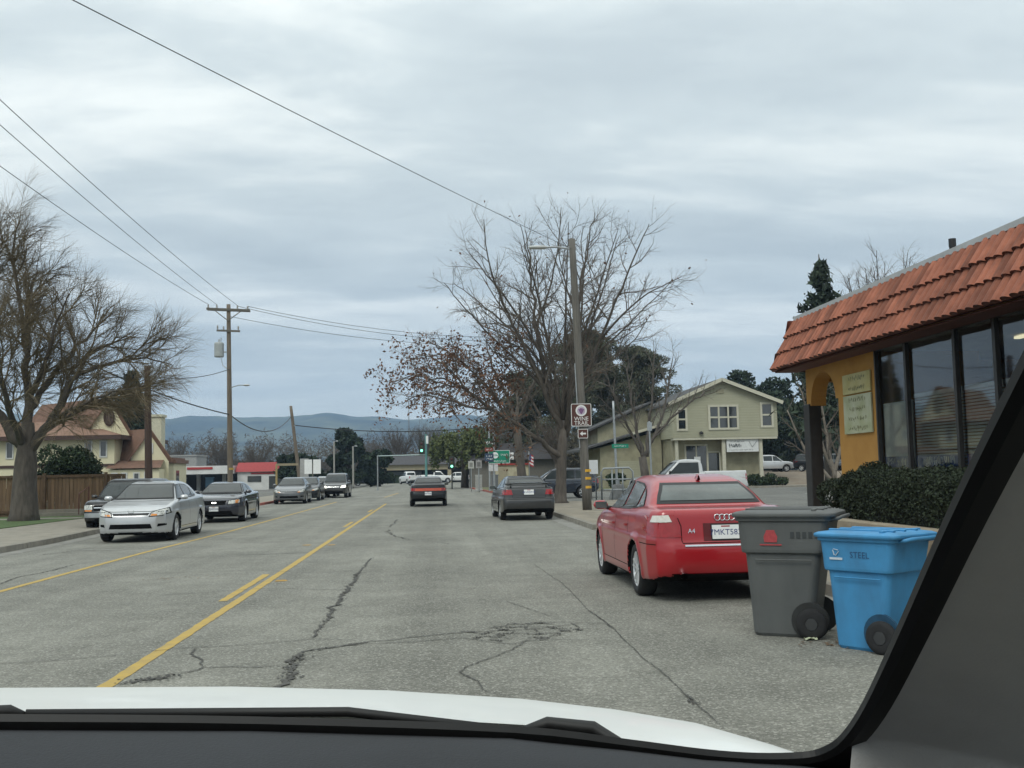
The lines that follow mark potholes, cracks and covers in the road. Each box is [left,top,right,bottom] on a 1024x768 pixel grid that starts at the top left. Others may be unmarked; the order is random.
crack [0,550,611,697]
